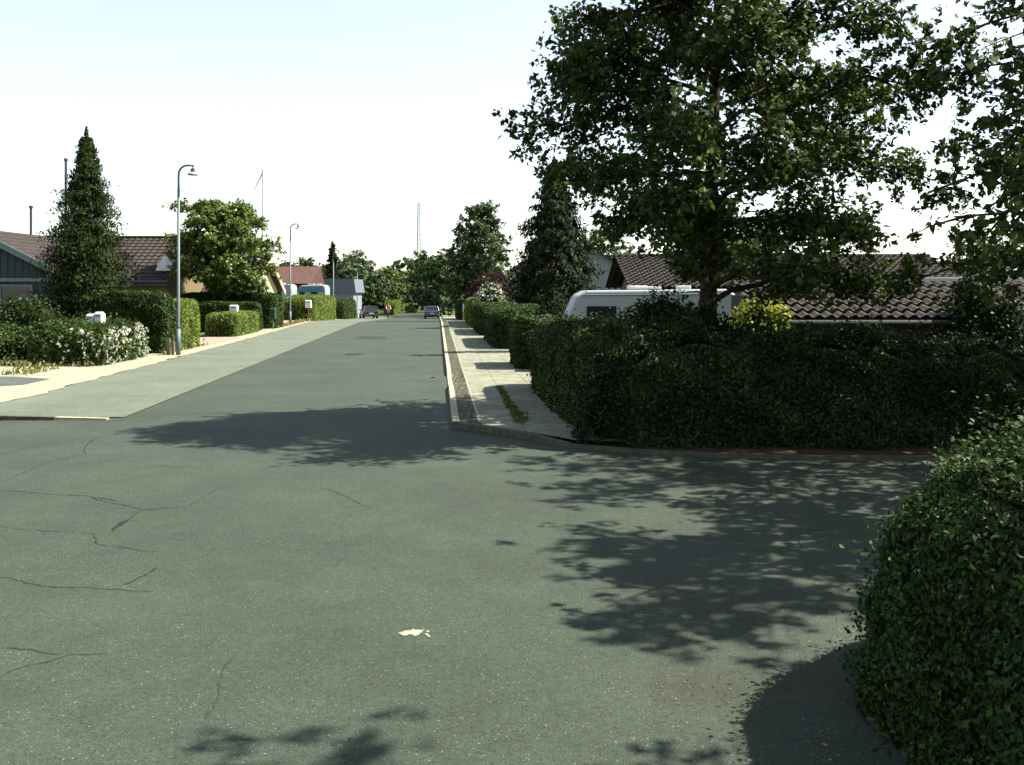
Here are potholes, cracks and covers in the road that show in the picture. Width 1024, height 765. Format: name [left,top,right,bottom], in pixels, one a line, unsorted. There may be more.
crack [0,647,100,677]
crack [0,439,229,592]
crack [205,655,237,719]
